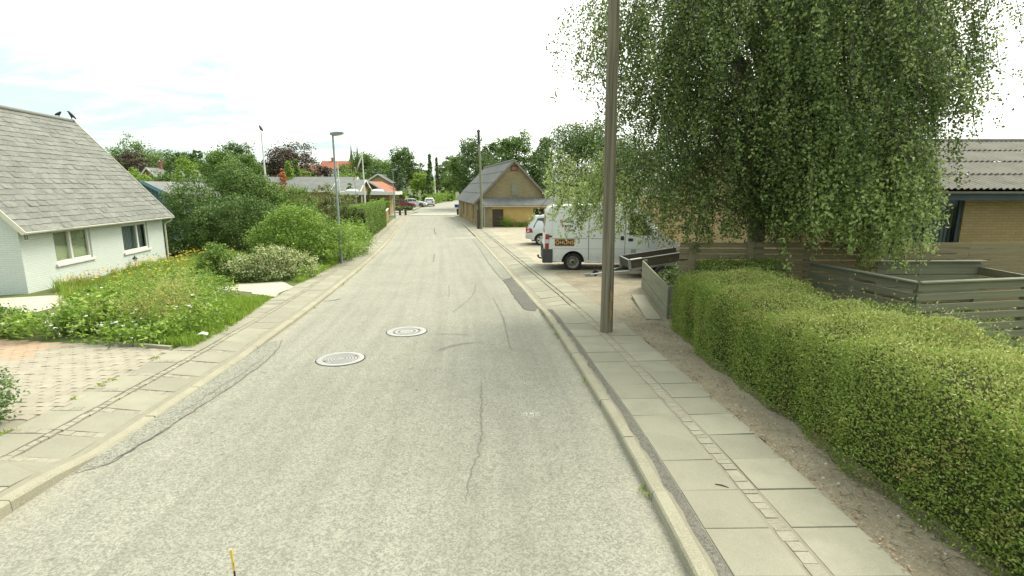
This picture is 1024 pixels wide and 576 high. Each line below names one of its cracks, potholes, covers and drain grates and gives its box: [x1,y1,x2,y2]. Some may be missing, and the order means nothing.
crack [466,381,483,502]
manhole cover [315,352,366,366]
manhole cover [386,327,427,337]
